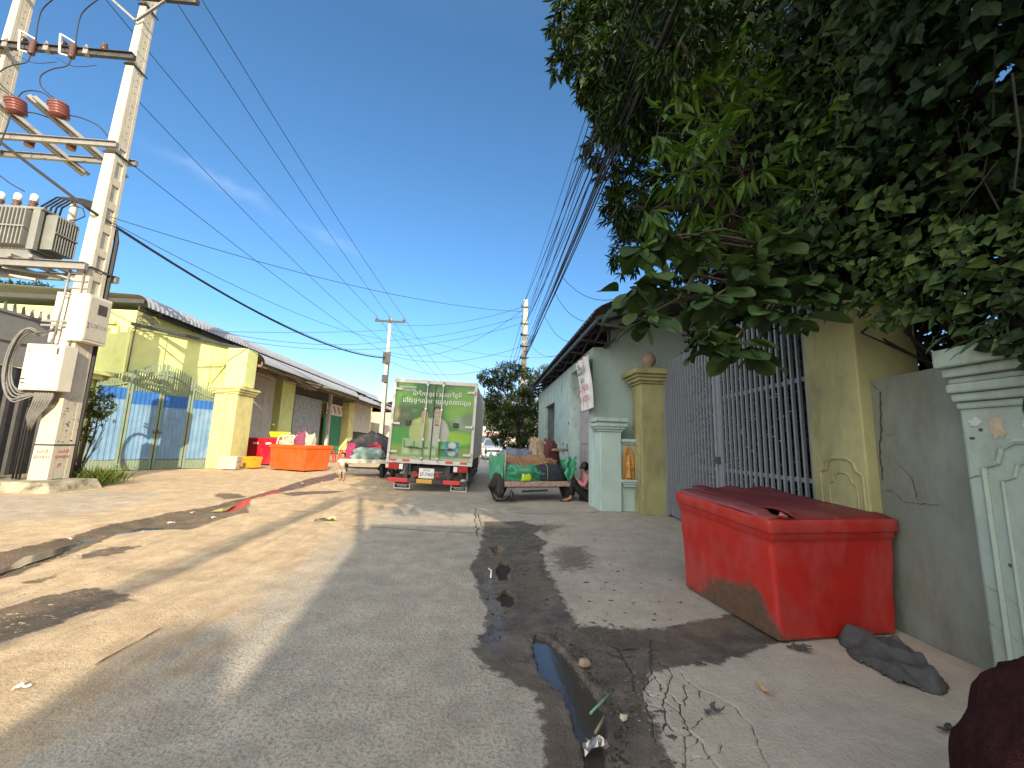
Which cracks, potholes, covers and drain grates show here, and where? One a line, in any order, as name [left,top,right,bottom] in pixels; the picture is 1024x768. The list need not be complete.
pothole [523,631,619,768]
pothole [491,588,522,610]
pothole [486,545,511,558]
crack [95,627,162,665]
pothole [491,560,517,582]
crack [607,639,770,768]
